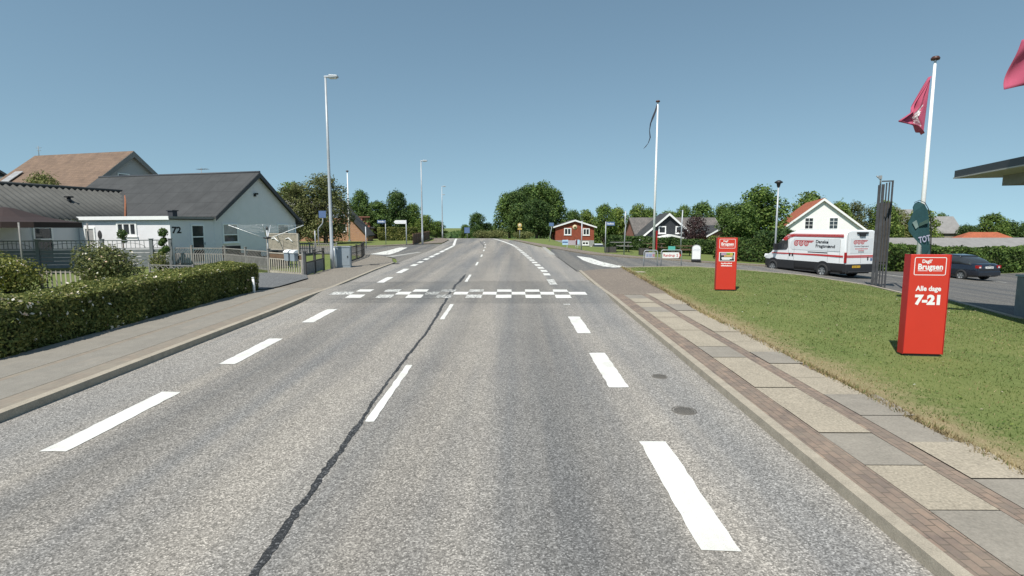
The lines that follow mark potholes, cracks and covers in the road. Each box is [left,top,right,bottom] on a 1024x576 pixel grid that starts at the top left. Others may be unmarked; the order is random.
manhole cover [671,406,697,415]
